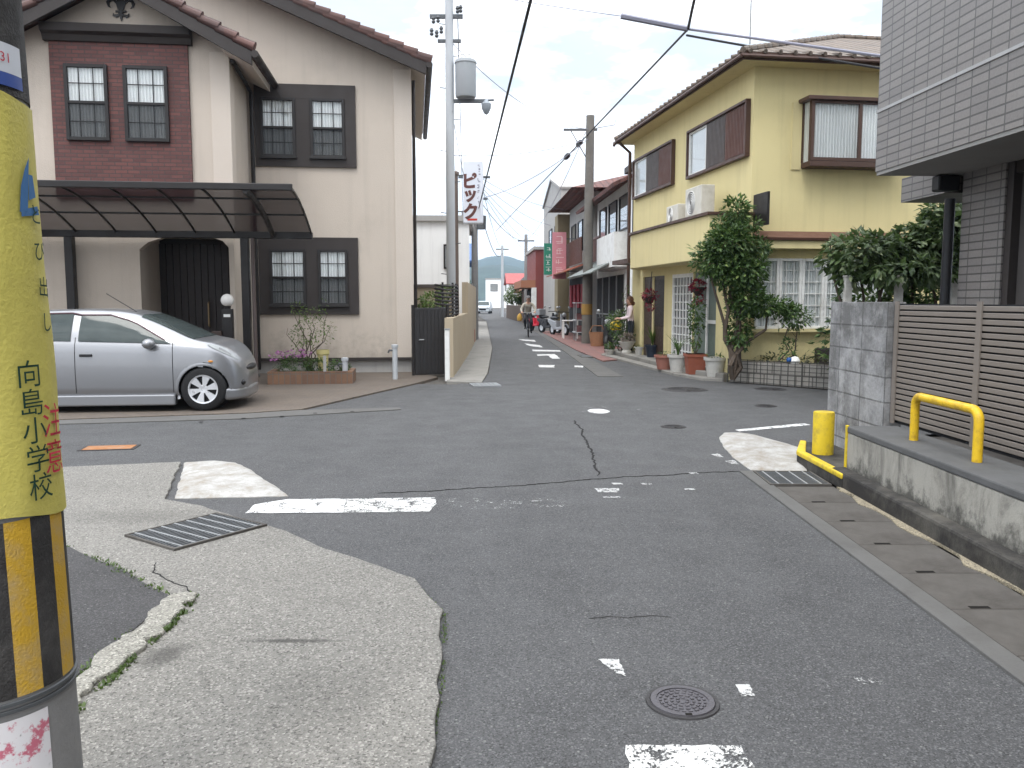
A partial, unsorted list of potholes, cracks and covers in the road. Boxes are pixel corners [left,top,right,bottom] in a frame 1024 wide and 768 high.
manhole cover [645,684,720,721]
drain grate [124,512,267,551]
drain grate [753,471,832,487]
crack [384,421,736,493]
crack [152,563,190,592]
